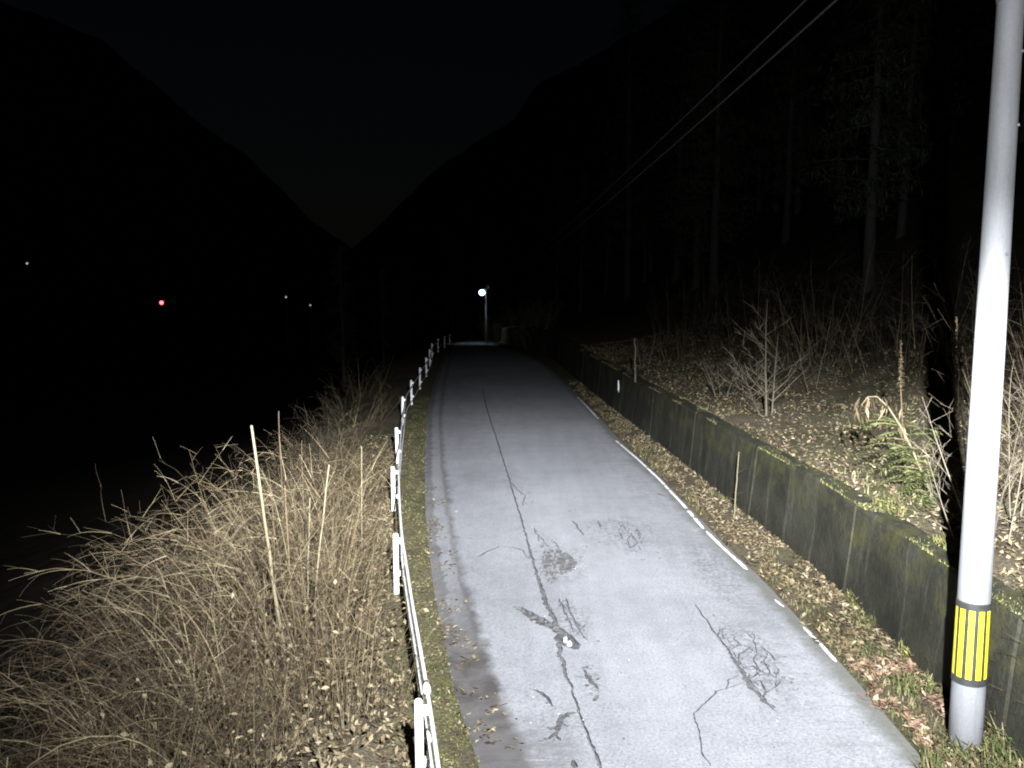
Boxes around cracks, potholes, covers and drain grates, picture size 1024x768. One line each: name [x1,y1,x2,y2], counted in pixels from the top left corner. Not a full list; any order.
crack [693,605,795,766]
crack [558,597,600,642]
crack [466,511,661,576]
crack [530,688,577,741]
